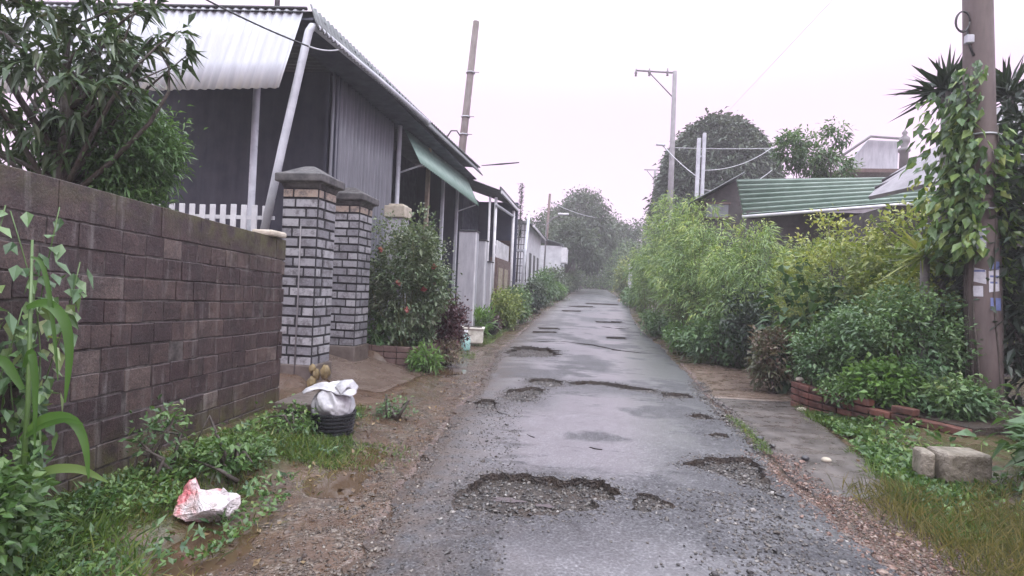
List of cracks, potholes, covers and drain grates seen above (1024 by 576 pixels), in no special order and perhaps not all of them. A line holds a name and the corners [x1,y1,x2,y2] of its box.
pothole [498,345,568,358]
pothole [421,468,639,532]
pothole [699,431,748,444]
pothole [469,397,511,413]
pothole [681,412,725,424]
pothole [652,390,701,401]
pothole [491,385,555,405]
pothole [664,451,817,525]
pothole [518,377,571,390]
pothole [559,380,672,395]
